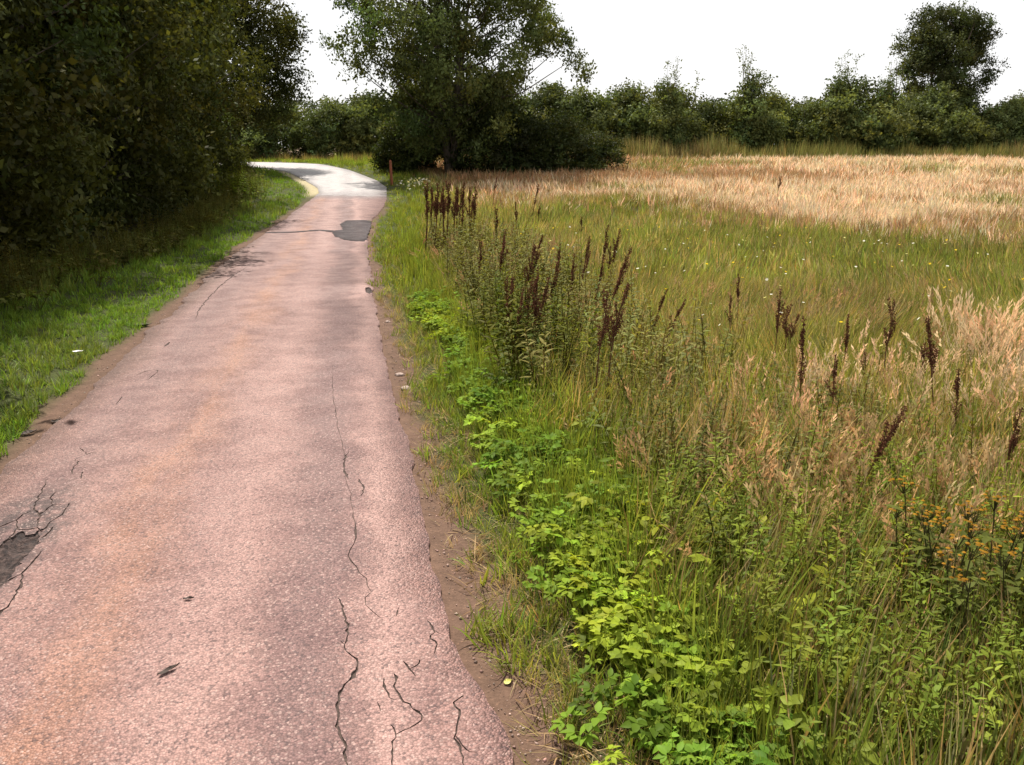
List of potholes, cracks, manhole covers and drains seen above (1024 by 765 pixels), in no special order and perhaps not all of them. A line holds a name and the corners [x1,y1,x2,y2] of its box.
crack [453,695,472,765]
crack [377,620,443,765]
pothole [0,528,44,587]
crack [196,268,245,318]
crack [0,448,93,614]
crack [332,368,381,765]
